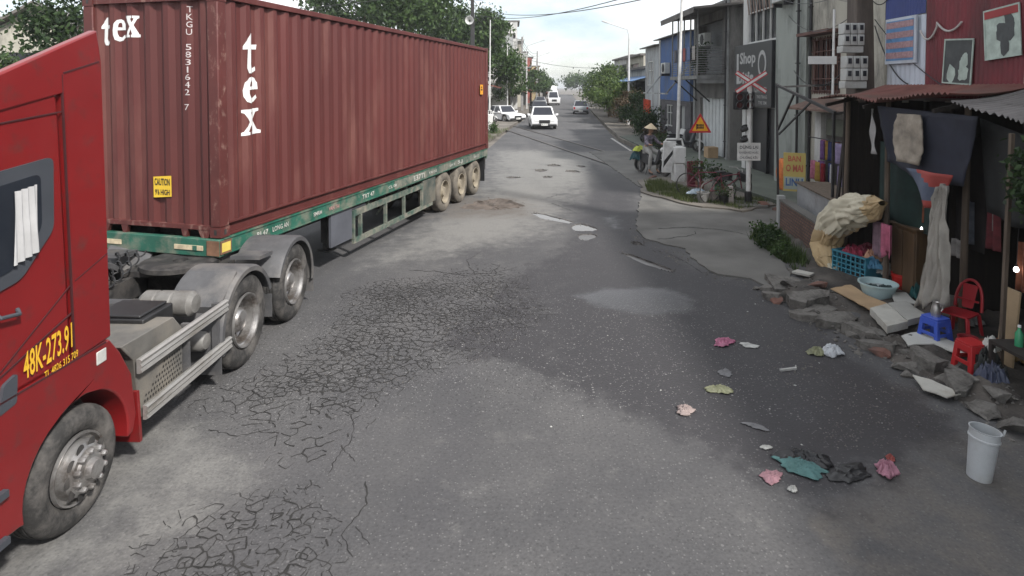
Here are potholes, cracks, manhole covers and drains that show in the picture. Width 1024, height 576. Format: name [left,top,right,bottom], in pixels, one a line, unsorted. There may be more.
crack [187,273,549,469]
pothole [460,197,525,210]
crack [341,481,370,557]
crack [667,227,742,273]
crack [124,480,349,576]
crack [415,254,551,328]
